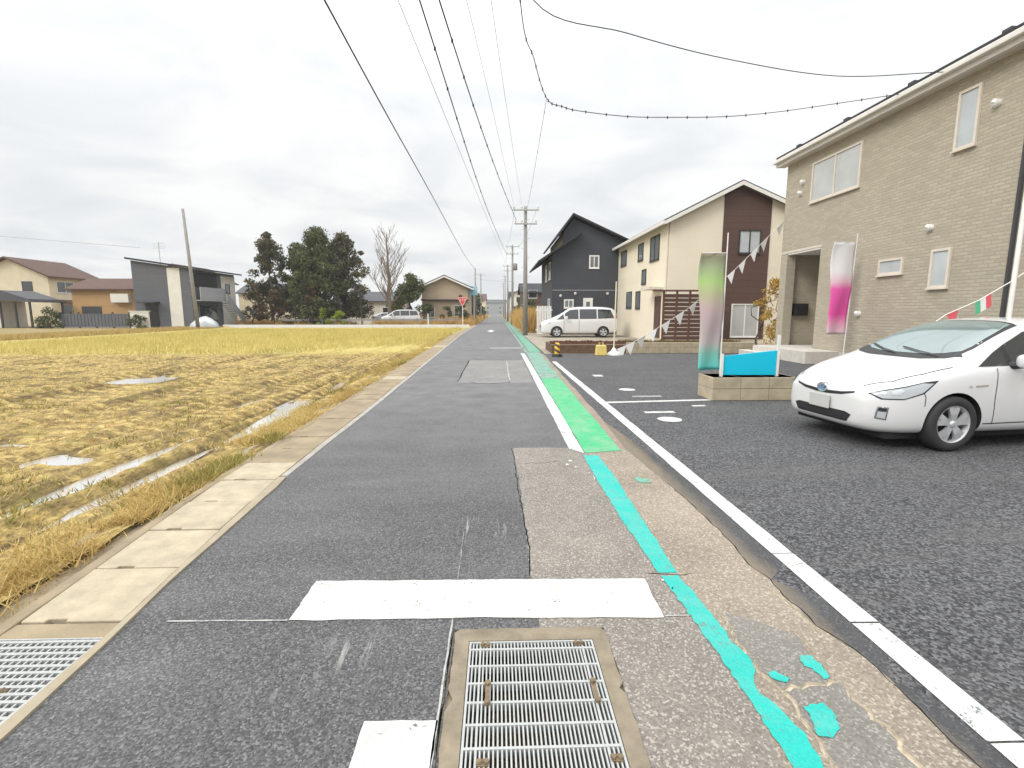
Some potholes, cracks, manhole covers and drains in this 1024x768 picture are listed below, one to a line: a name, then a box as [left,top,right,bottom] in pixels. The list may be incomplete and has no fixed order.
drain grate [0,637,103,725]
crack [721,576,925,768]
